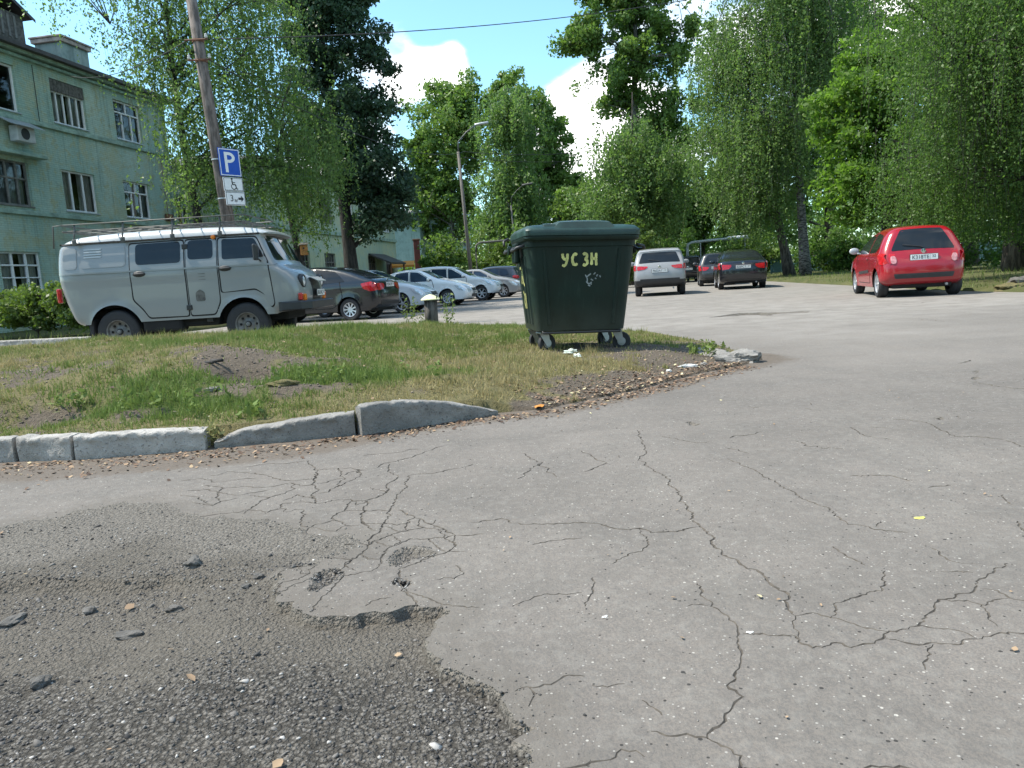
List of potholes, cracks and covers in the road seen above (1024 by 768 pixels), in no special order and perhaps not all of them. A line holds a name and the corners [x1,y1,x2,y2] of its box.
pothole [0,501,536,768]
crack [899,419,1024,447]
crack [181,446,478,612]
crack [473,430,1024,768]
